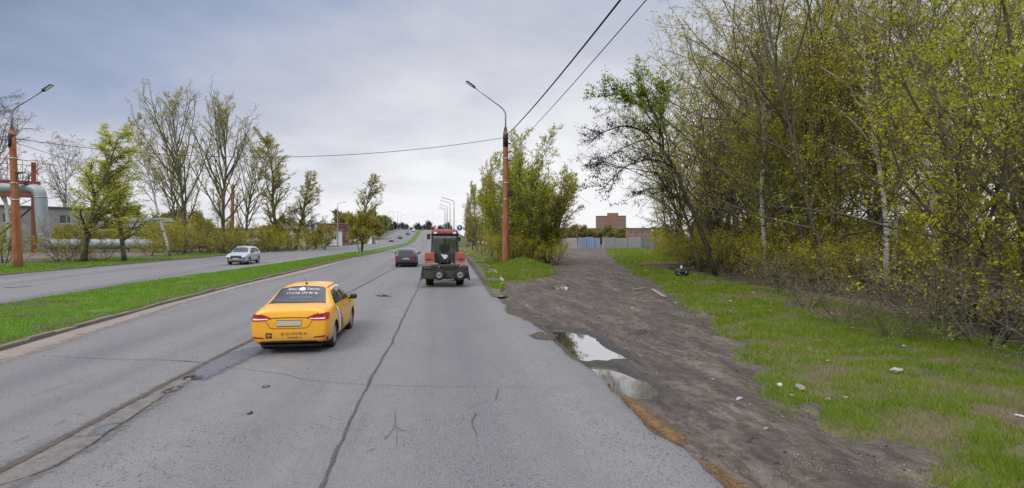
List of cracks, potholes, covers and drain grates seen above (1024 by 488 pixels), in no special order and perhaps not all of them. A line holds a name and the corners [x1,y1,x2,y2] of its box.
crack [0,250,541,485]
